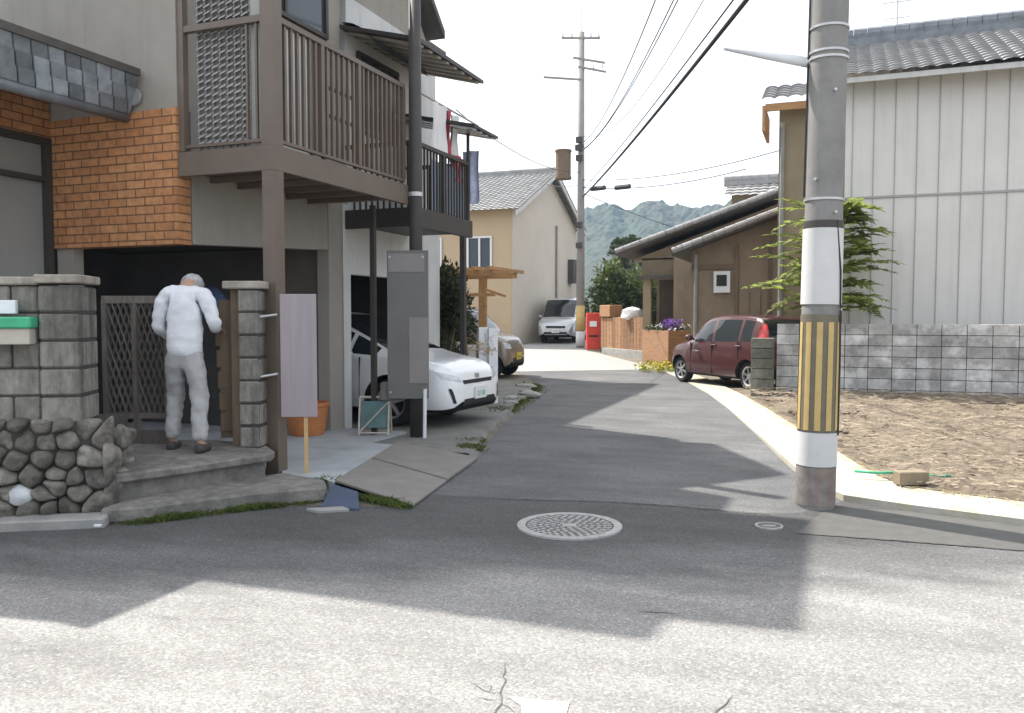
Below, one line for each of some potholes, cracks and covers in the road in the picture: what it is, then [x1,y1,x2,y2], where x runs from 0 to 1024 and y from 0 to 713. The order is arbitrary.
manhole cover [517,512,623,541]
manhole cover [755,522,783,530]
crack [470,663,515,713]
